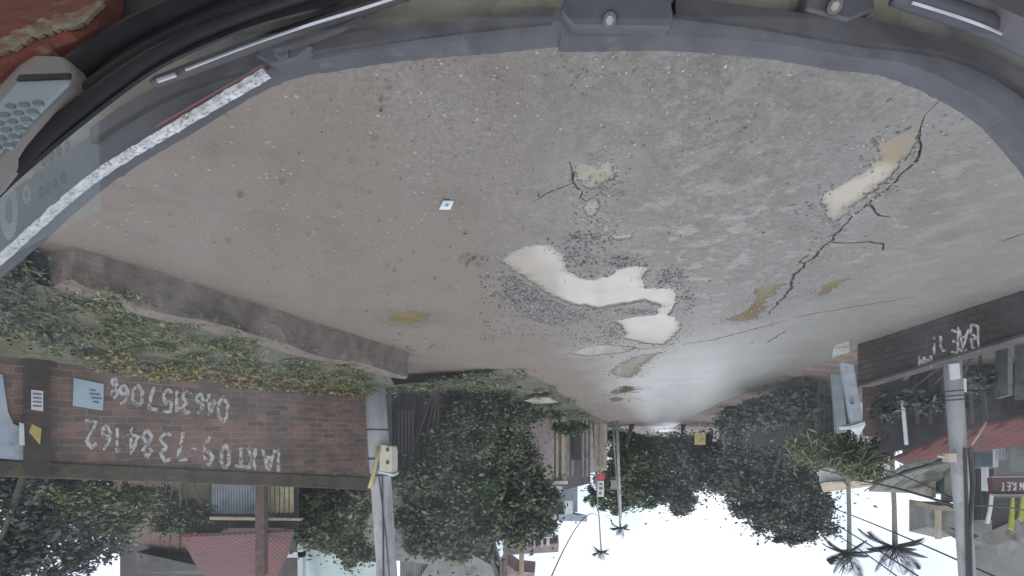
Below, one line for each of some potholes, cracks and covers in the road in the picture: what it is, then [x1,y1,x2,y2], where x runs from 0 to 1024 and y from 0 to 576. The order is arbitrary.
crack [537,161,586,201]
crack [769,101,939,312]
pothole [500,245,682,345]
pothole [598,222,635,241]
